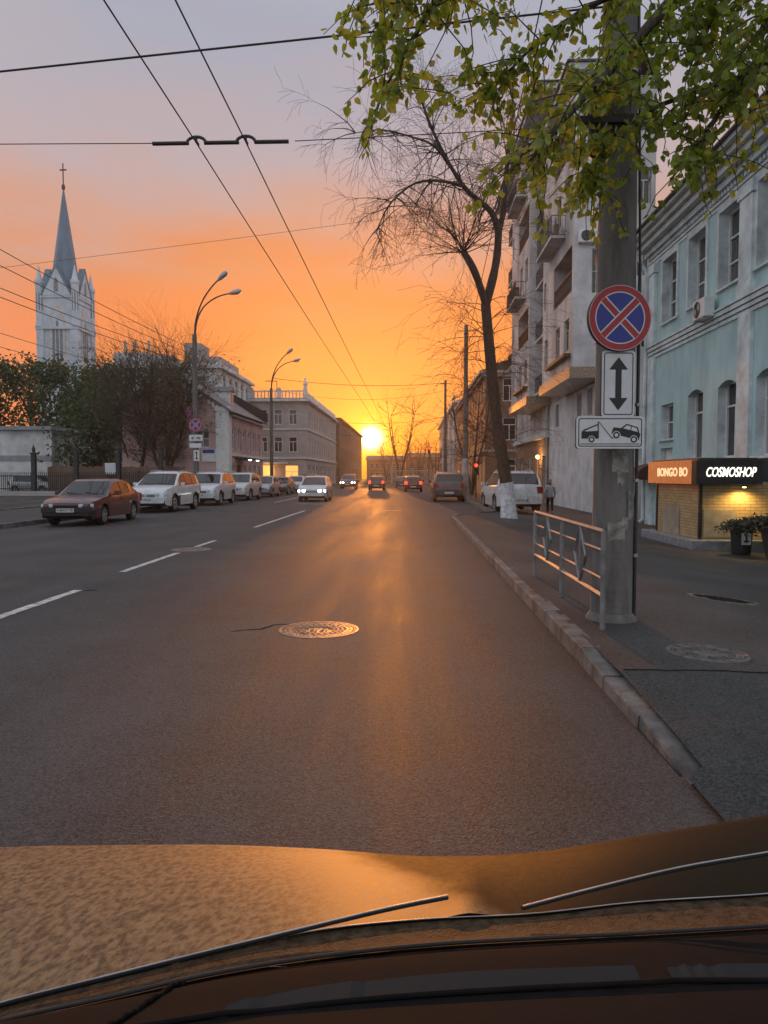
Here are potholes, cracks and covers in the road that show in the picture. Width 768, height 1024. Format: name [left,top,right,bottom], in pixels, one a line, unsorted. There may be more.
crack [230,624,286,632]
manhole cover [666,644,751,663]
manhole cover [278,621,359,638]
